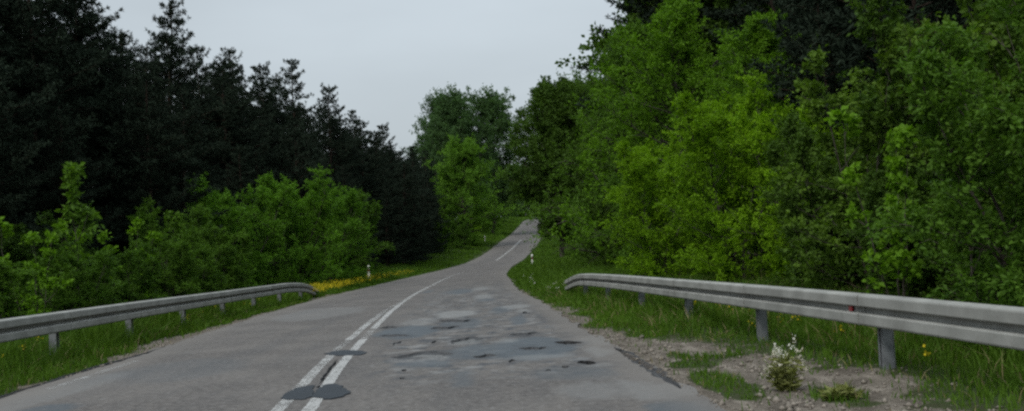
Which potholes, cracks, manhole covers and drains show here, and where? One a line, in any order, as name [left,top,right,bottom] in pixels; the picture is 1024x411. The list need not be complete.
pothole [451,336,482,345]
pothole [389,351,453,359]
